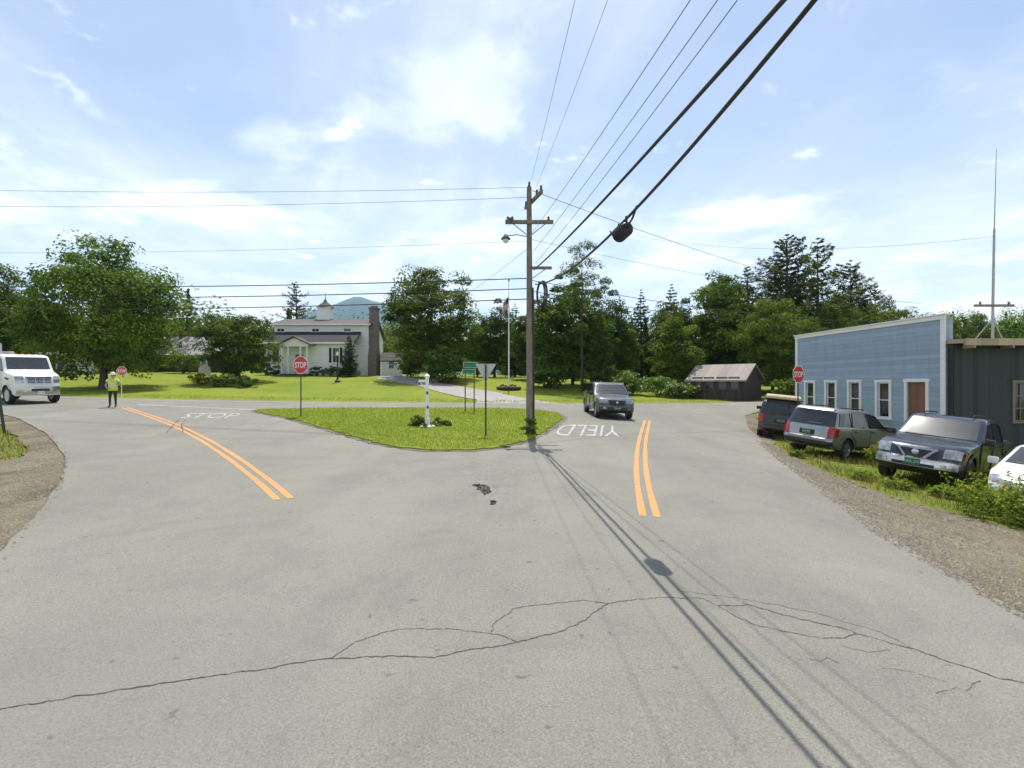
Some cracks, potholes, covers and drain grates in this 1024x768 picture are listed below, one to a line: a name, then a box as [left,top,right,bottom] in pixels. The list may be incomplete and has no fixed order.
pothole [472,484,491,495]
crack [0,591,1024,709]
